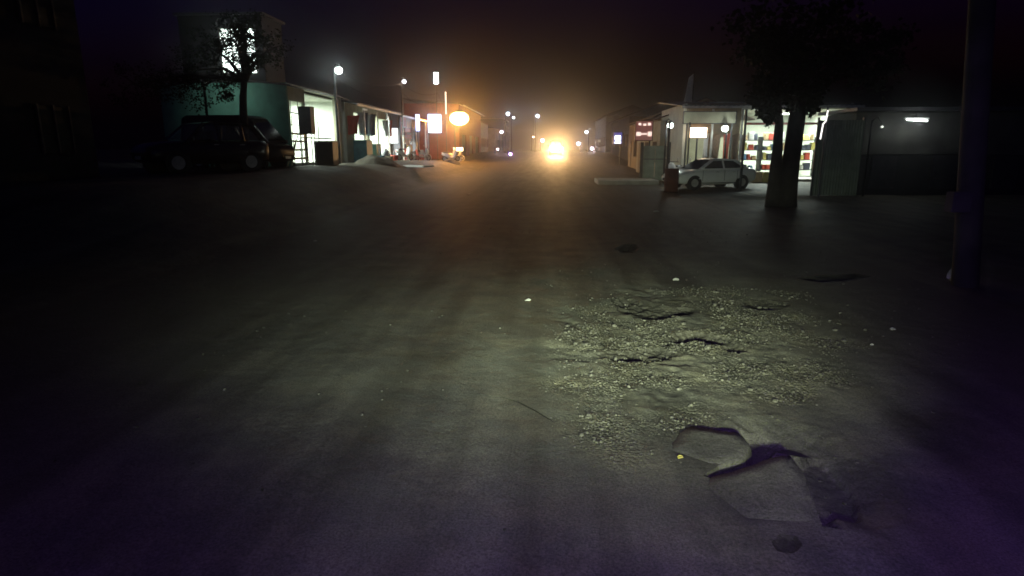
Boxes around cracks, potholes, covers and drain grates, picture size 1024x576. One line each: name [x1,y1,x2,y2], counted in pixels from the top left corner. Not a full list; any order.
pothole [771,534,803,553]
pothole [702,414,913,542]
pothole [662,331,751,354]
pothole [596,348,679,364]
pothole [796,274,871,283]
pothole [614,243,640,253]
crack [469,391,555,423]
pothole [611,296,696,320]
pothole [743,300,791,311]
